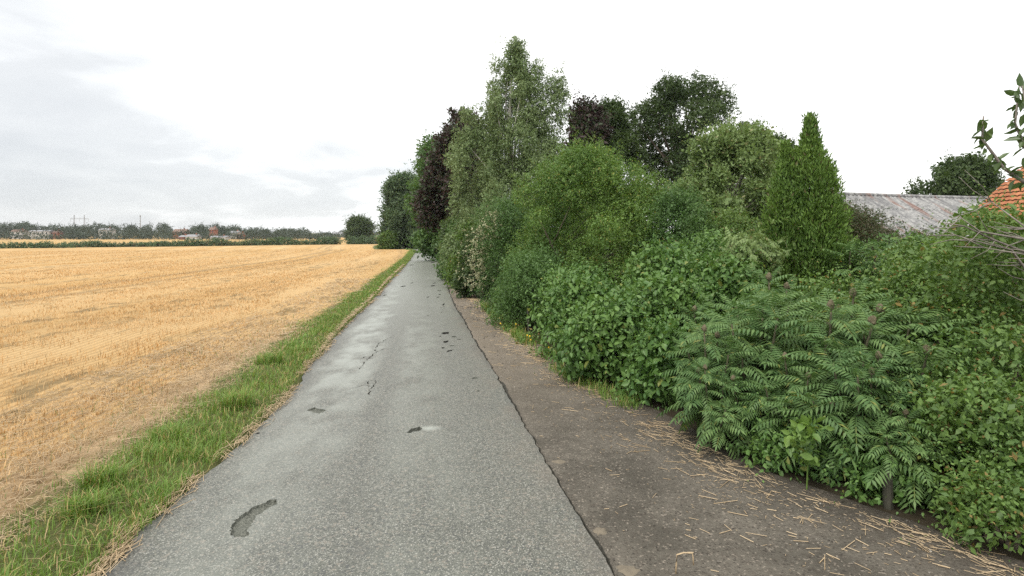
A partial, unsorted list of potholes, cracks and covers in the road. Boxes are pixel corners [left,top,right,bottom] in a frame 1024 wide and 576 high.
crack [352,338,388,395]
pothole [229,499,278,537]
